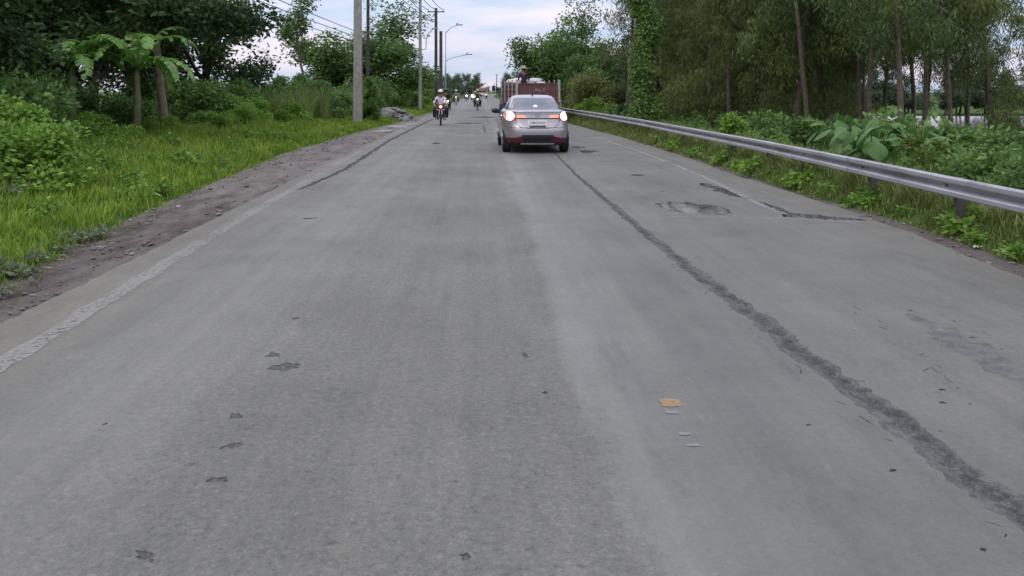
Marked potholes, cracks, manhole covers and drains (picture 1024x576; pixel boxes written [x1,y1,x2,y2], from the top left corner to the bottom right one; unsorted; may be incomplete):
pothole [136,550,156,563]
pothole [267,362,301,371]
crack [555,153,1024,553]
pothole [655,201,732,215]
